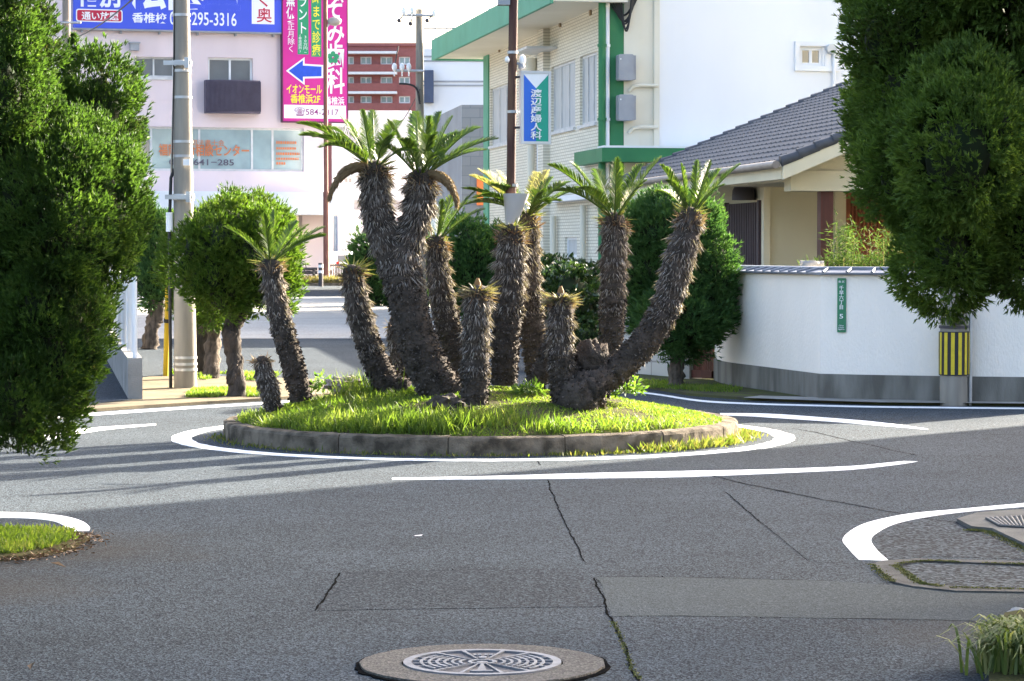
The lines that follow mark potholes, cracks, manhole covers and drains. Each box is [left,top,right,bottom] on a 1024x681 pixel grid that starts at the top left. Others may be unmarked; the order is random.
crack [534,458,642,681]
manhole cover [354,644,611,681]
crack [714,476,903,560]
